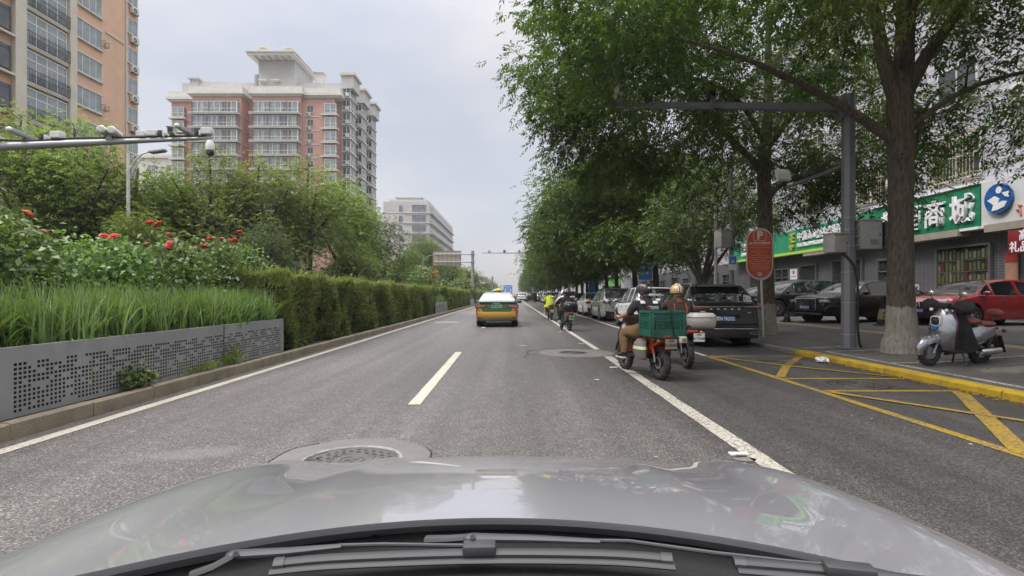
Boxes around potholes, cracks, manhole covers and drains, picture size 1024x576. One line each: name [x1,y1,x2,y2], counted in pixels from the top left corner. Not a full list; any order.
manhole cover [826,379,892,389]
manhole cover [540,349,614,357]
manhole cover [271,438,430,463]
